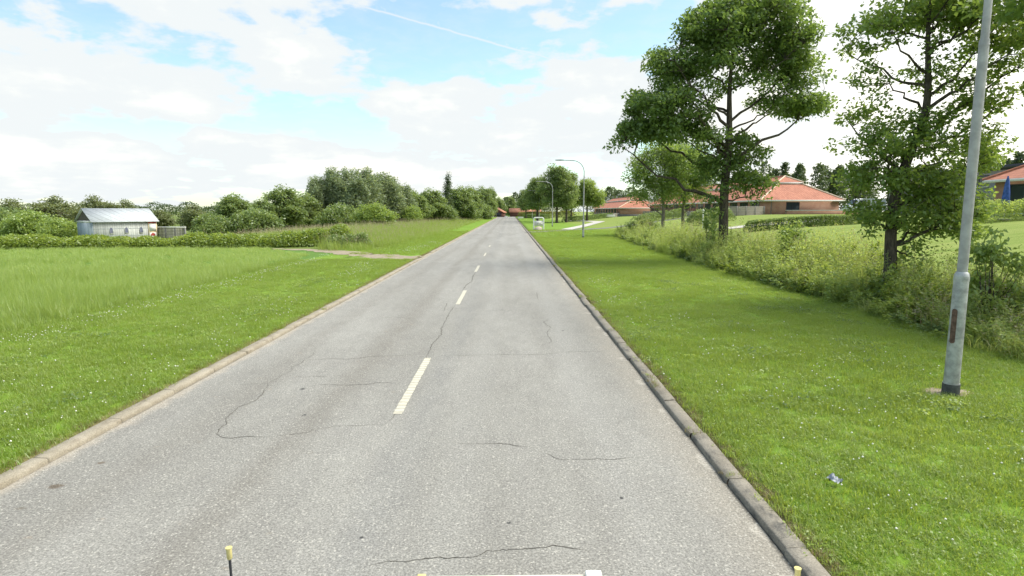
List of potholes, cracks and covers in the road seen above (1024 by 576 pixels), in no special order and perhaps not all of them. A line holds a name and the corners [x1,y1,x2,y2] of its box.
crack [368,545,590,566]
crack [391,273,596,419]
crack [216,352,411,438]
